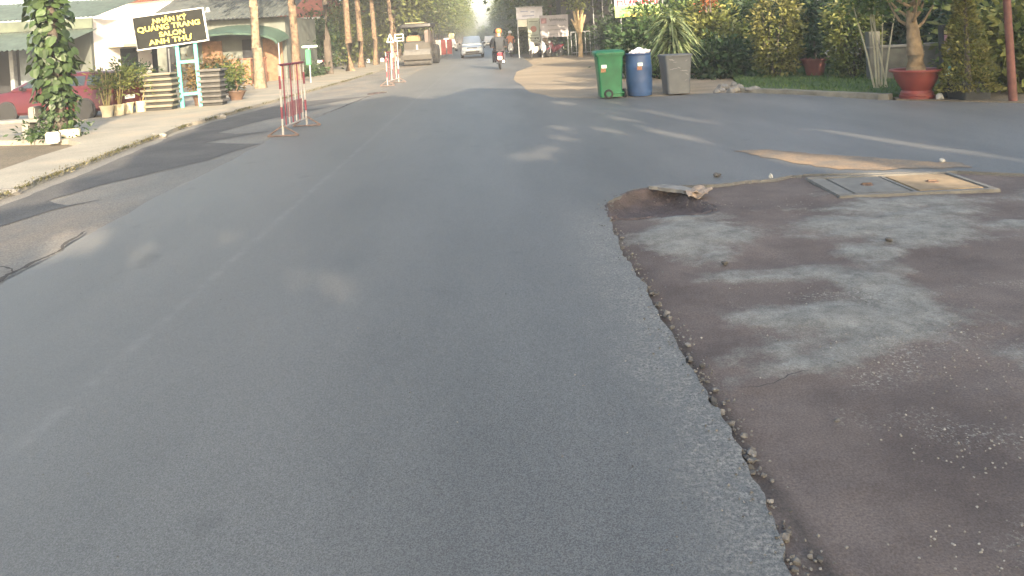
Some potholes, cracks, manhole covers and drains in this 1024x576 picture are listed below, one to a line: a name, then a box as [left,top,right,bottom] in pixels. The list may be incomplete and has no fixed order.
manhole cover [827,176,910,194]
crack [0,231,85,282]
manhole cover [886,174,983,191]
